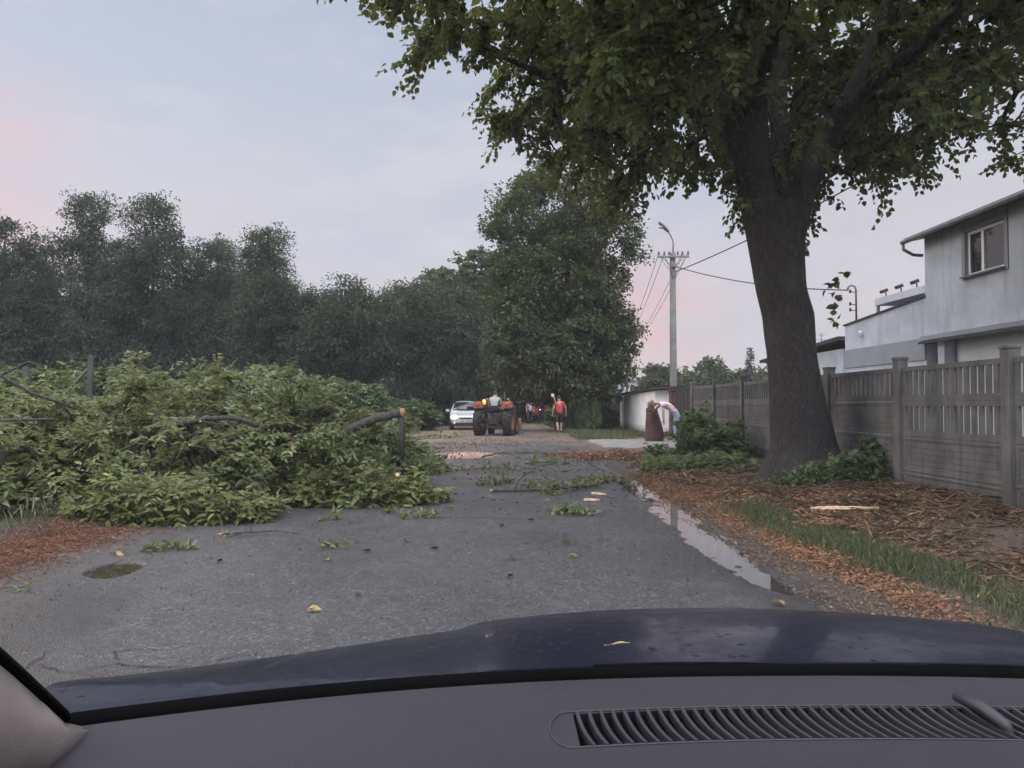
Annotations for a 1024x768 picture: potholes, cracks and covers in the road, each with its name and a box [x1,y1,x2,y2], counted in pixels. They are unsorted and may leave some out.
crack [24,648,250,678]
pothole [79,558,150,580]
